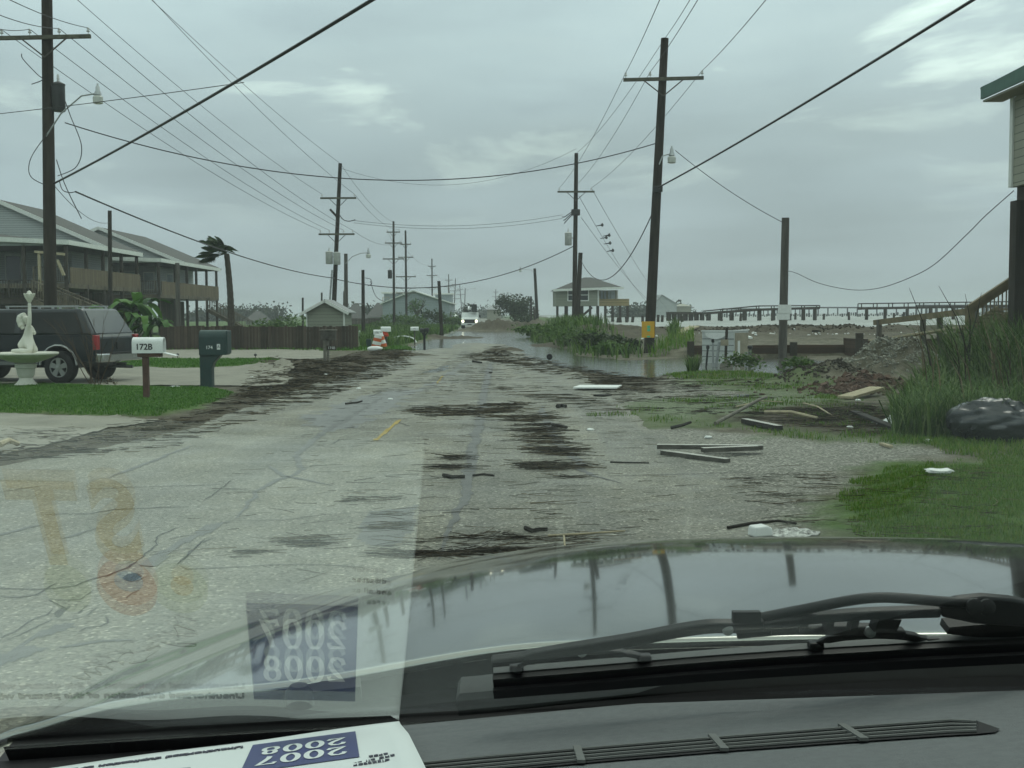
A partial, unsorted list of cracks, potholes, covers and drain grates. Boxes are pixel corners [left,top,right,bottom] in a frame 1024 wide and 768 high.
crack [43,480,234,515]
crack [0,525,353,640]
crack [241,510,424,521]
